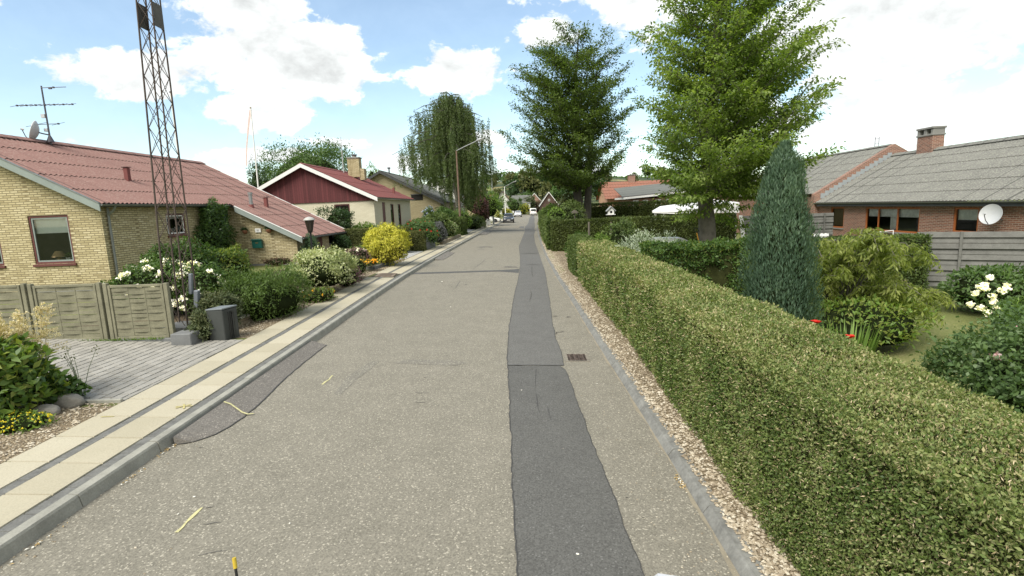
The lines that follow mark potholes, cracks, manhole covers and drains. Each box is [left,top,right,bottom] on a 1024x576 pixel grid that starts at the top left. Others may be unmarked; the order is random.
drain grate [564,354,590,362]
